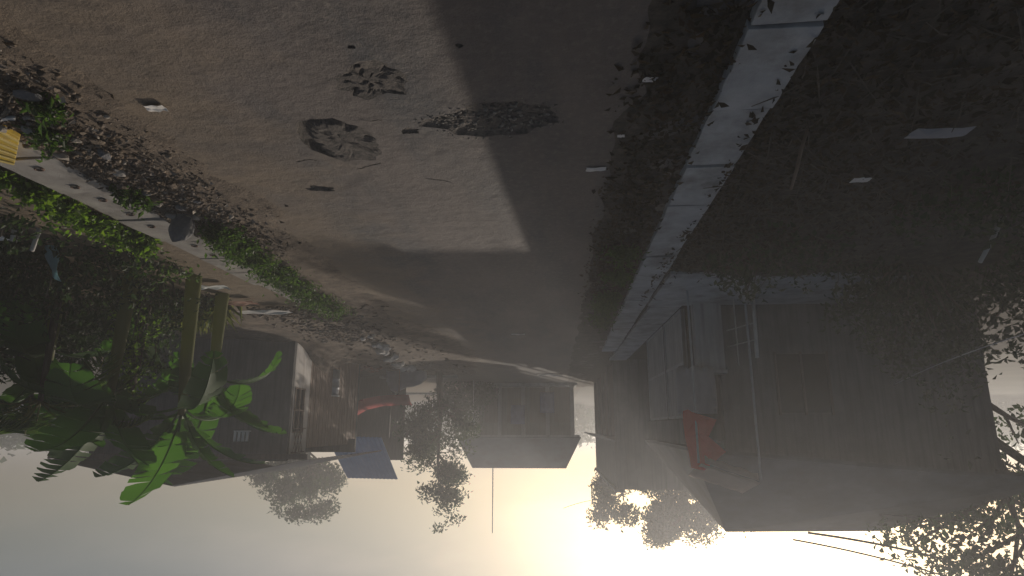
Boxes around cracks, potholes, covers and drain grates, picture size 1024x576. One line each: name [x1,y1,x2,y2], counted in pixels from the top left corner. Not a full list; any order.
pothole [415,98,564,140]
pothole [296,118,382,162]
pothole [335,59,408,100]
